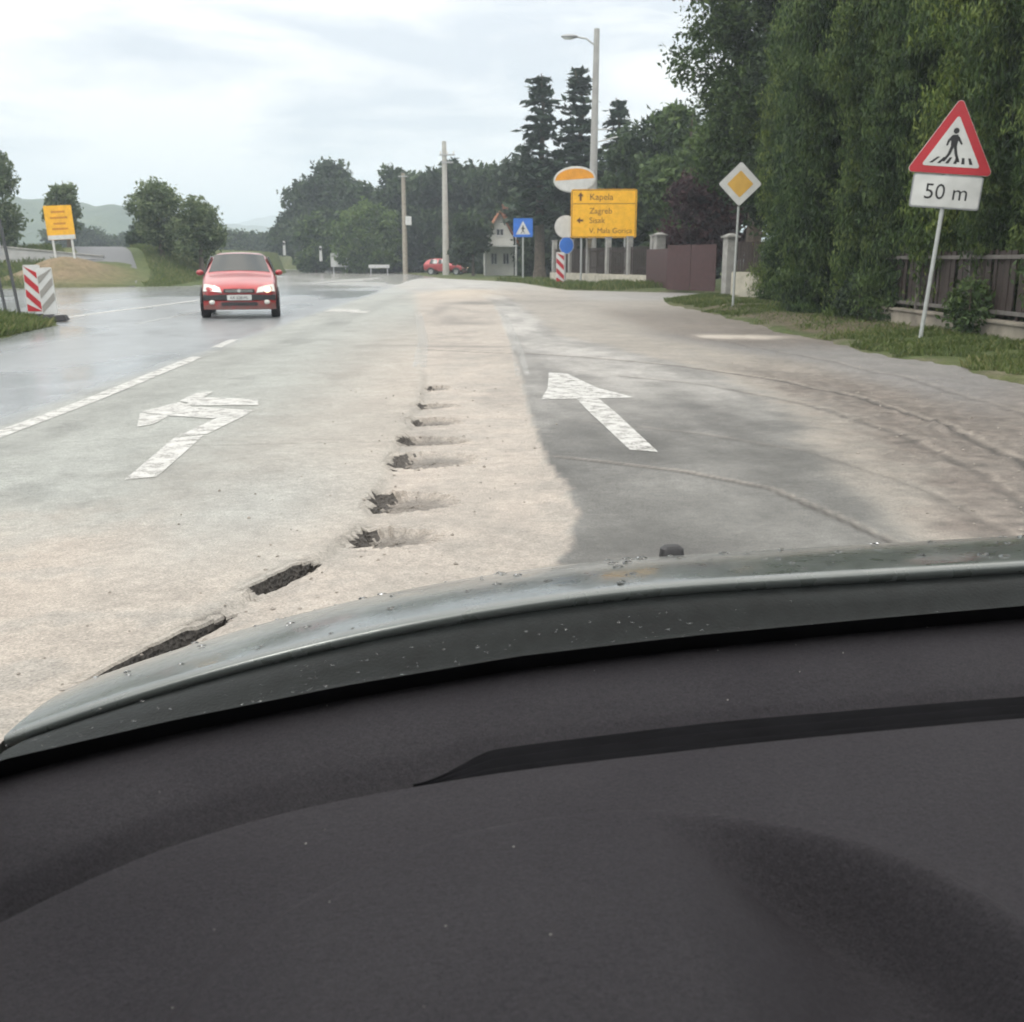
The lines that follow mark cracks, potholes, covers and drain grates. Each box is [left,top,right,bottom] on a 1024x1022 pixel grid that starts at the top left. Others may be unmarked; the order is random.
pothole [234,557,334,602]
pothole [58,607,250,691]
pothole [339,525,451,552]
pothole [357,488,468,516]
pothole [410,401,463,411]
pothole [404,416,467,428]
pothole [422,384,456,392]
pothole [389,433,476,448]
pothole [381,451,483,471]
